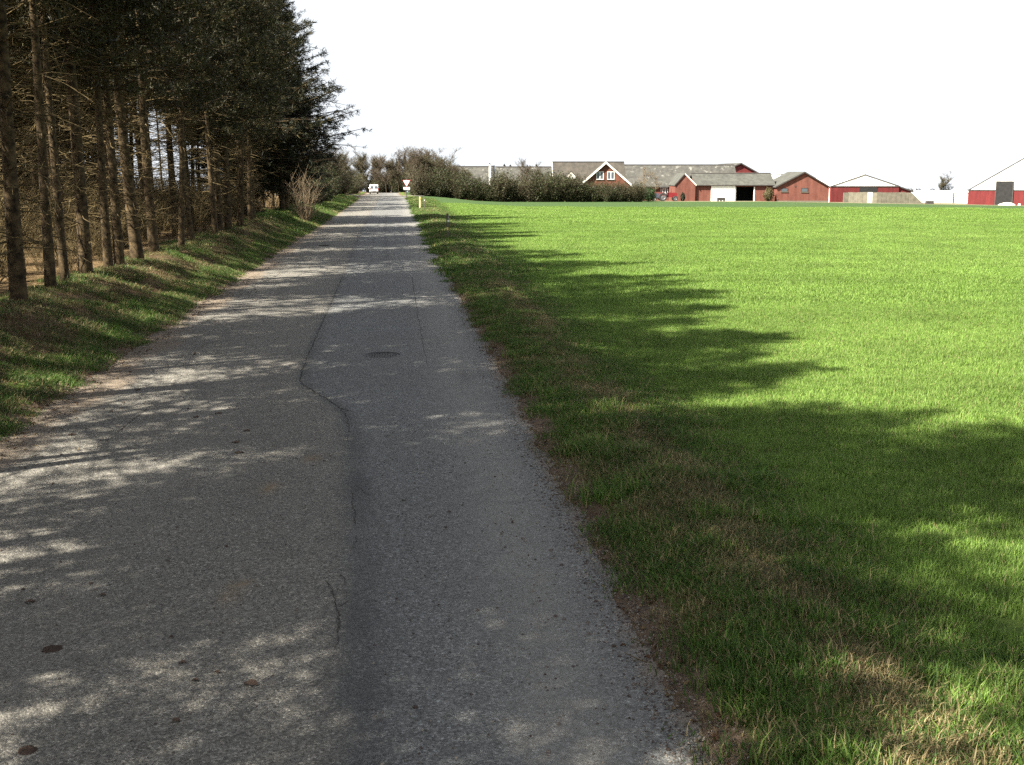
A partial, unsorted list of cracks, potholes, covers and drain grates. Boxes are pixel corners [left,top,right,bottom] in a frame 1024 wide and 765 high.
crack [327,572,347,648]
